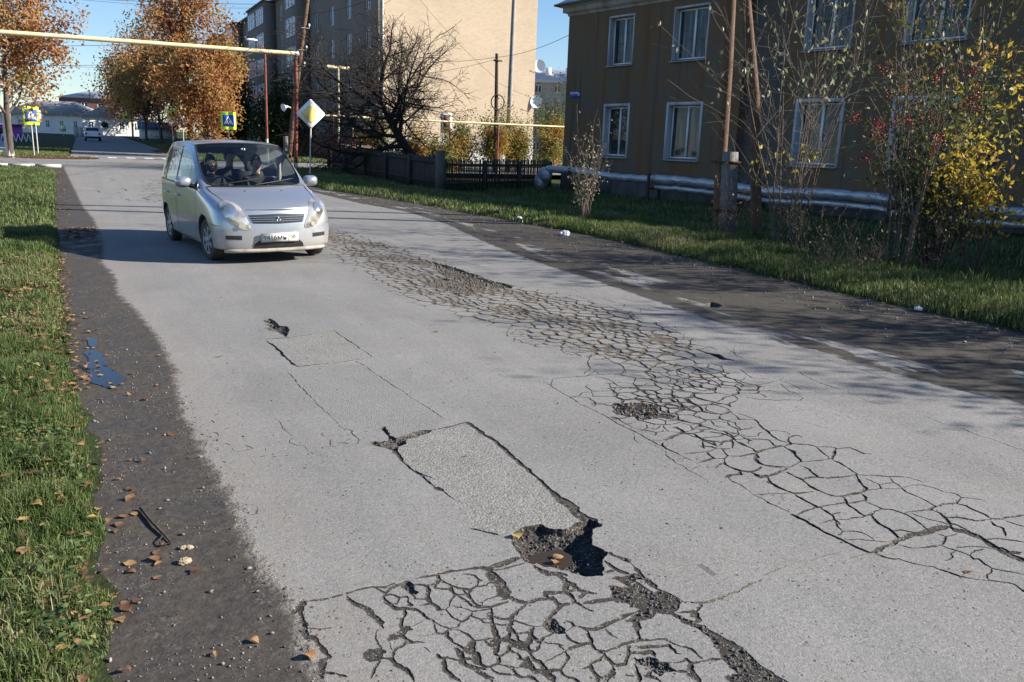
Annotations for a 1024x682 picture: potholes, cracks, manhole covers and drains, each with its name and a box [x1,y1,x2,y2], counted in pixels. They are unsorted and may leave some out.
pothole [263,319,290,337]
crack [211,229,1024,682]
pothole [511,518,608,577]
pothole [612,402,676,420]
pothole [369,426,432,452]
